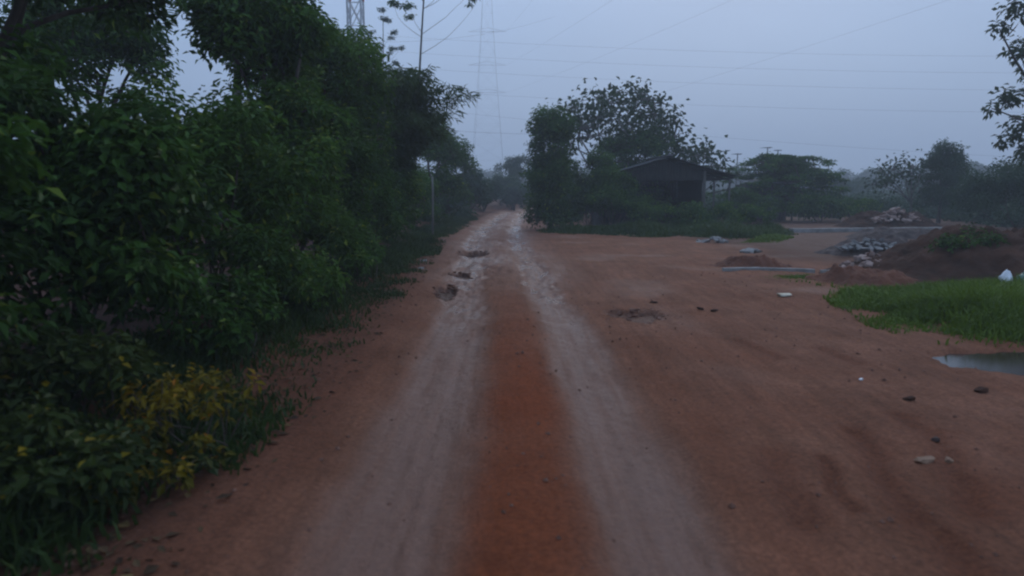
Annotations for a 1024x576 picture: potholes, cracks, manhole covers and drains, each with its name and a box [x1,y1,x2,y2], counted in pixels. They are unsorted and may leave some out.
pothole [606,308,669,324]
pothole [431,284,459,302]
pothole [456,250,490,258]
pothole [448,271,473,279]
